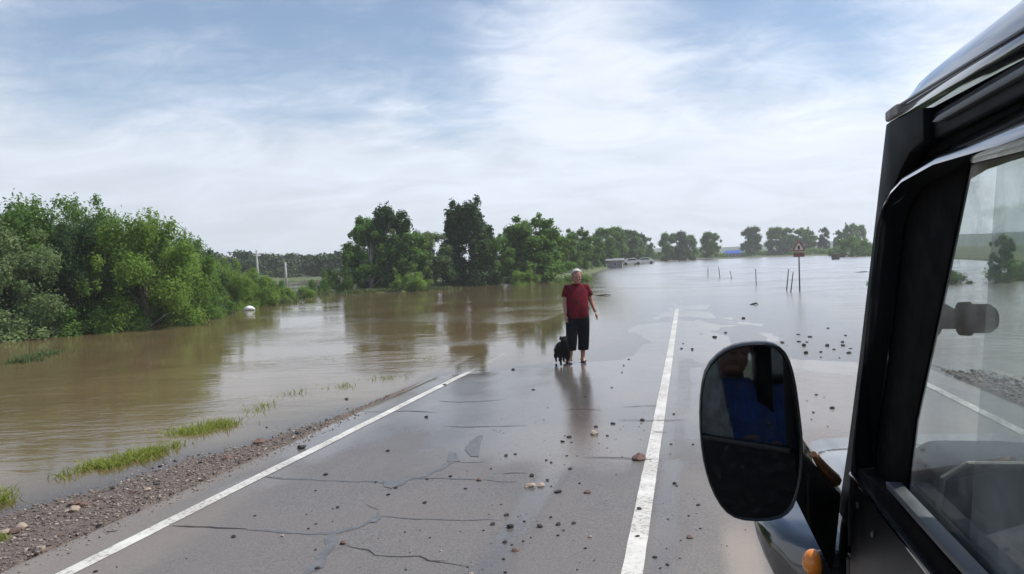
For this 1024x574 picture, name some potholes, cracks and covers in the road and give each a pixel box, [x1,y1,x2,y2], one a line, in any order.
crack [344,544,465,566]
